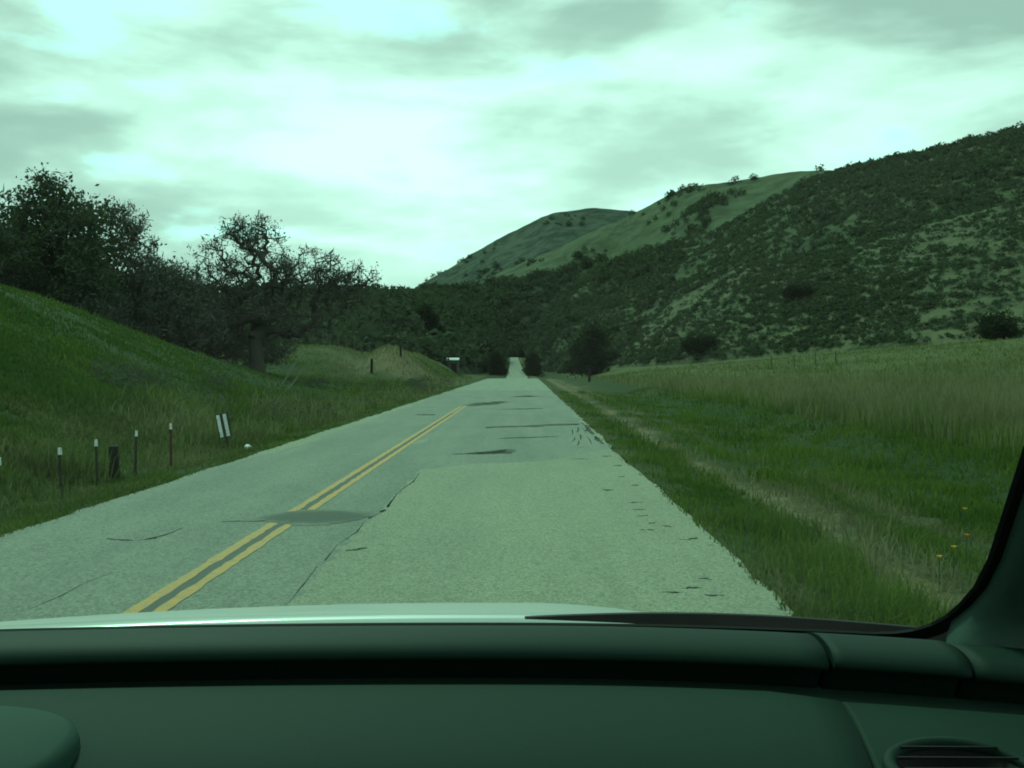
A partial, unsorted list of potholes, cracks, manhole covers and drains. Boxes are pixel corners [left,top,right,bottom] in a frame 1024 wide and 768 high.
crack [467,396,709,546]
crack [106,528,182,541]
